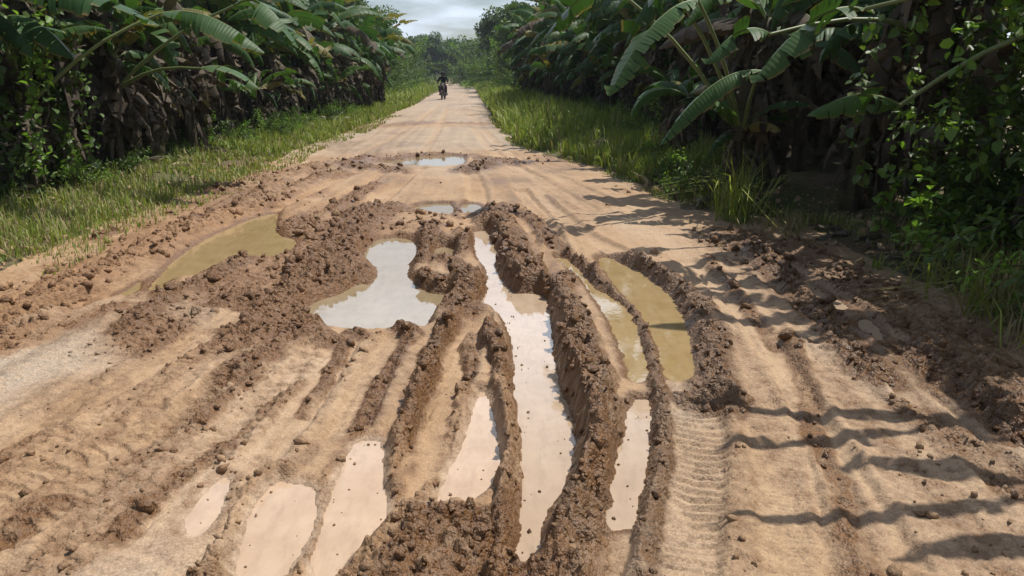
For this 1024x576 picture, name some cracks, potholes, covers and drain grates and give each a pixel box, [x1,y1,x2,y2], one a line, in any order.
pothole [406,199,458,214]
pothole [456,199,488,213]
pothole [139,207,307,293]
pothole [371,152,471,166]
pothole [590,250,710,382]
pothole [169,467,242,542]
pothole [292,229,458,329]
